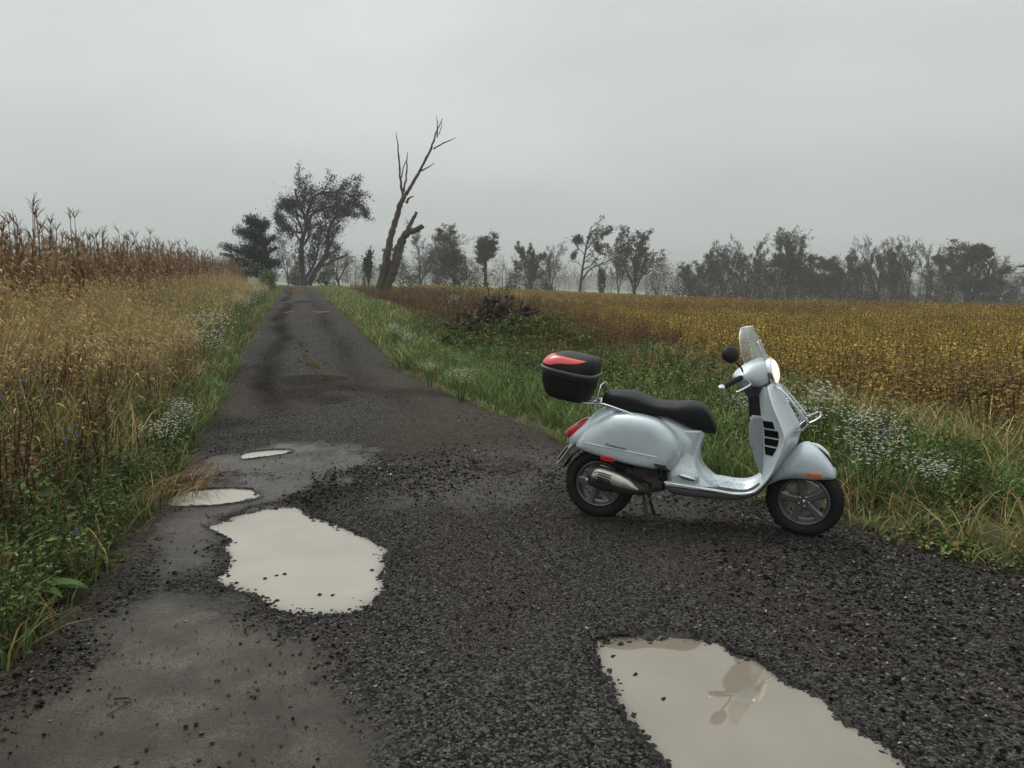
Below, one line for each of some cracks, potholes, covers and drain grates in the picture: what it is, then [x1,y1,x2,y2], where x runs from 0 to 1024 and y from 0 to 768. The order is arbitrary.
pothole [586,624,922,768]
pothole [200,501,394,619]
pothole [162,486,264,507]
pothole [239,448,294,460]
